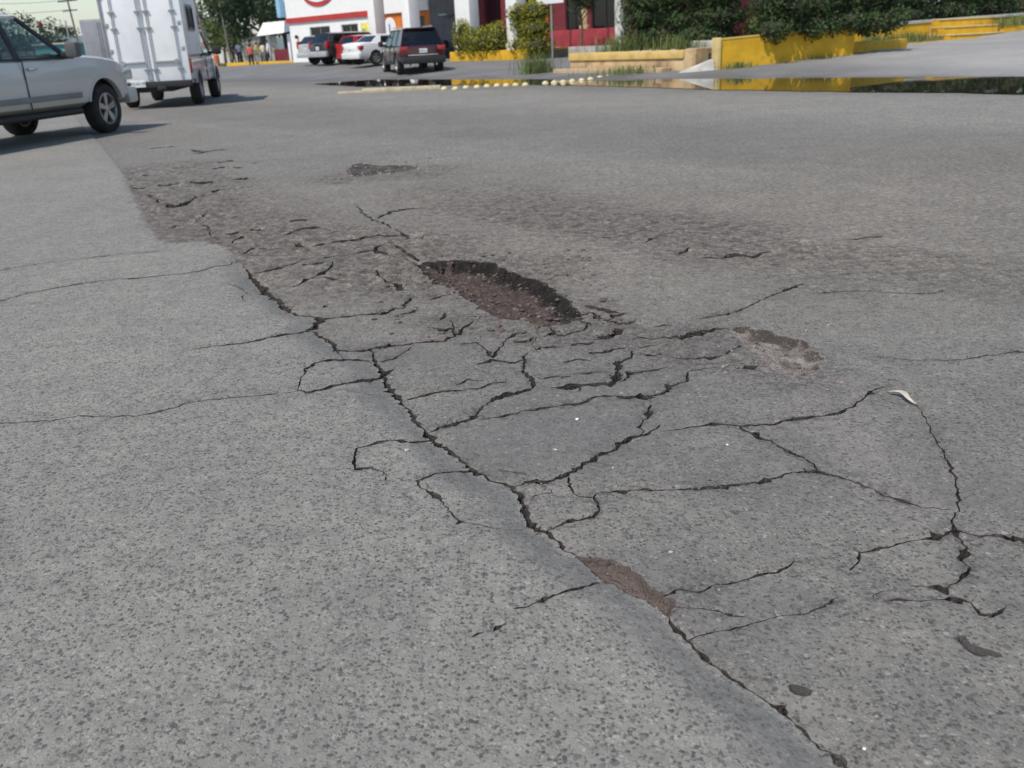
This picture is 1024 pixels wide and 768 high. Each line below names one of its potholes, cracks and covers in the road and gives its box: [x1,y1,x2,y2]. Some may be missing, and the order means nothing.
crack [0,146,425,308]
crack [645,237,770,259]
pothole [954,635,1003,658]
pothole [415,260,582,327]
crack [0,389,384,424]
pothole [729,326,825,377]
pothole [346,163,417,177]
crack [323,283,1024,640]
pothole [575,556,677,618]
